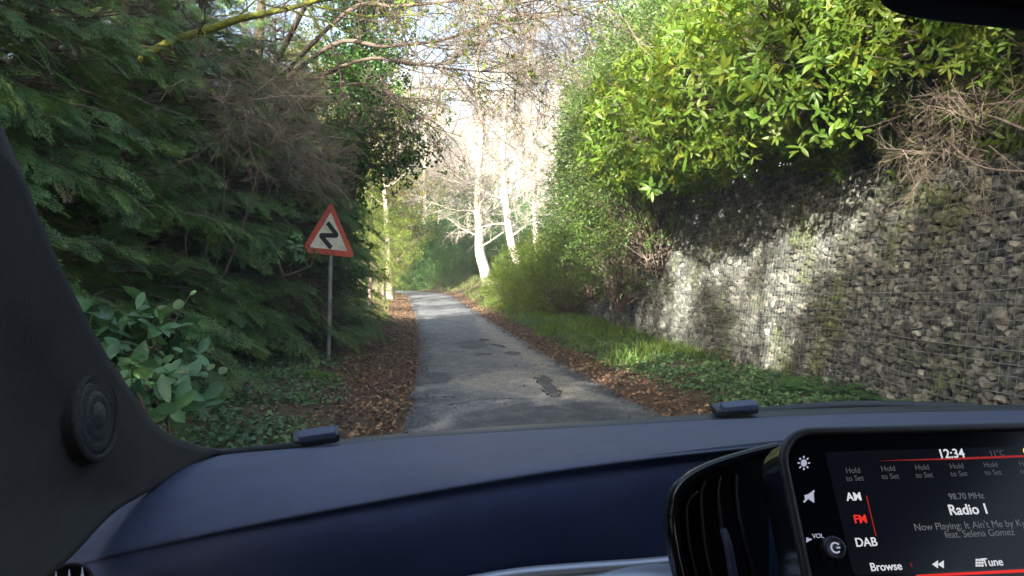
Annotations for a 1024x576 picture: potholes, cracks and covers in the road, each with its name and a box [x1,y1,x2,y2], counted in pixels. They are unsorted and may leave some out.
pothole [533,375,560,397]
